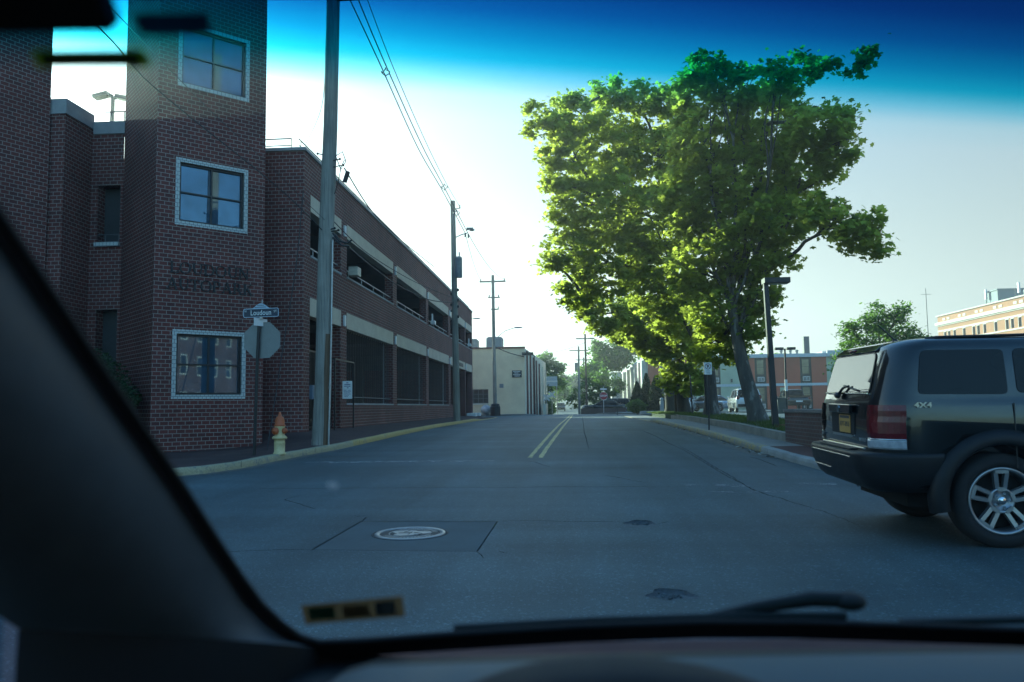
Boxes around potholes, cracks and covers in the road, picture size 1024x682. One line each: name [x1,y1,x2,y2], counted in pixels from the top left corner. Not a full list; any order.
pothole [644,588,700,601]
manhole cover [371,527,448,541]
